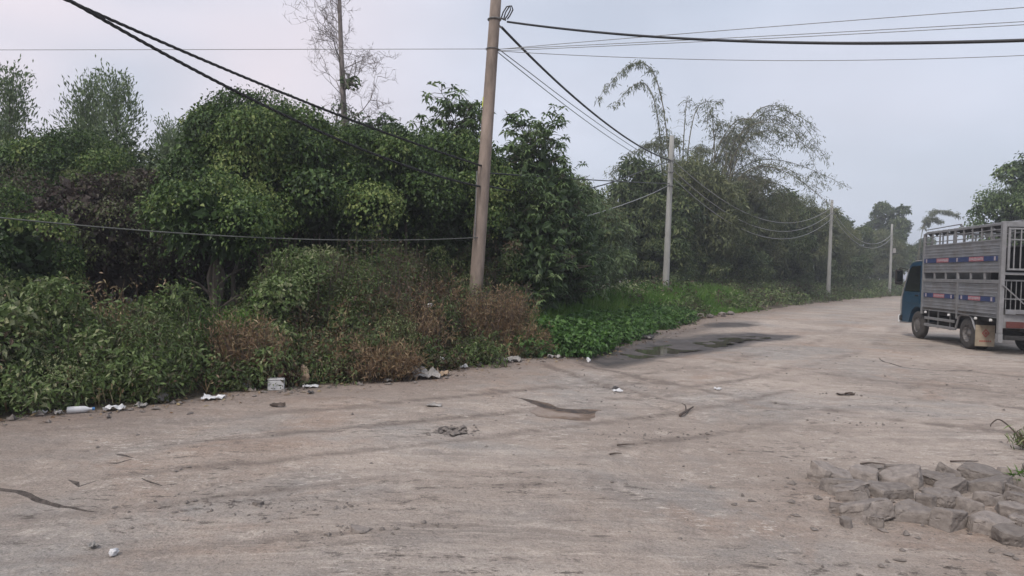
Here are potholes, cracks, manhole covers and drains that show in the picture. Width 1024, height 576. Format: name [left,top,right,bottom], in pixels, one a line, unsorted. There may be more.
pothole [515,397,604,421]
pothole [584,333,793,366]
crack [0,480,95,512]
